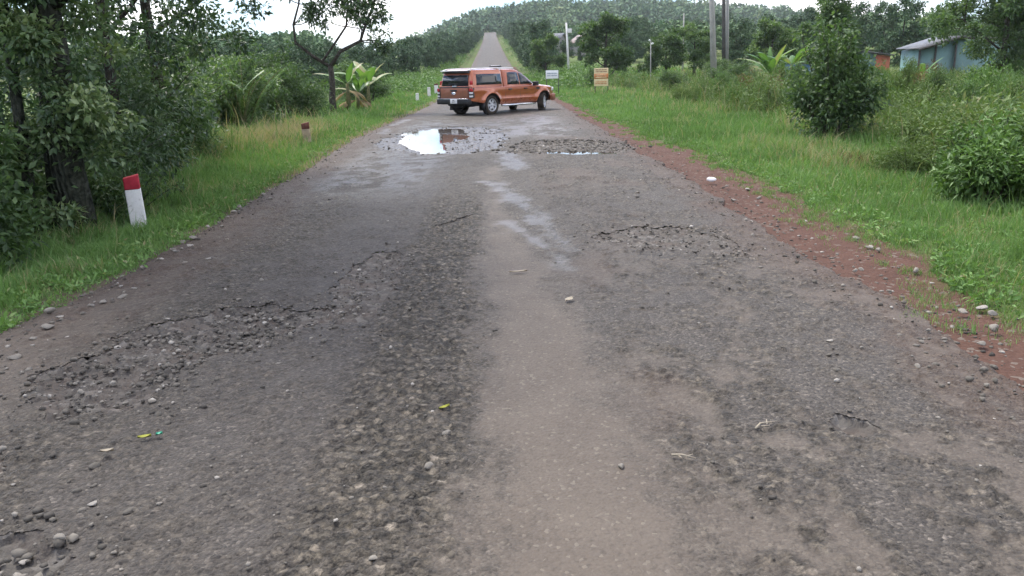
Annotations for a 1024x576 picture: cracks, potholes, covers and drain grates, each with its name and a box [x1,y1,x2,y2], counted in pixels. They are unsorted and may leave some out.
pothole [374,127,509,155]
pothole [828,413,881,437]
pothole [19,303,365,424]
pothole [511,139,637,155]
